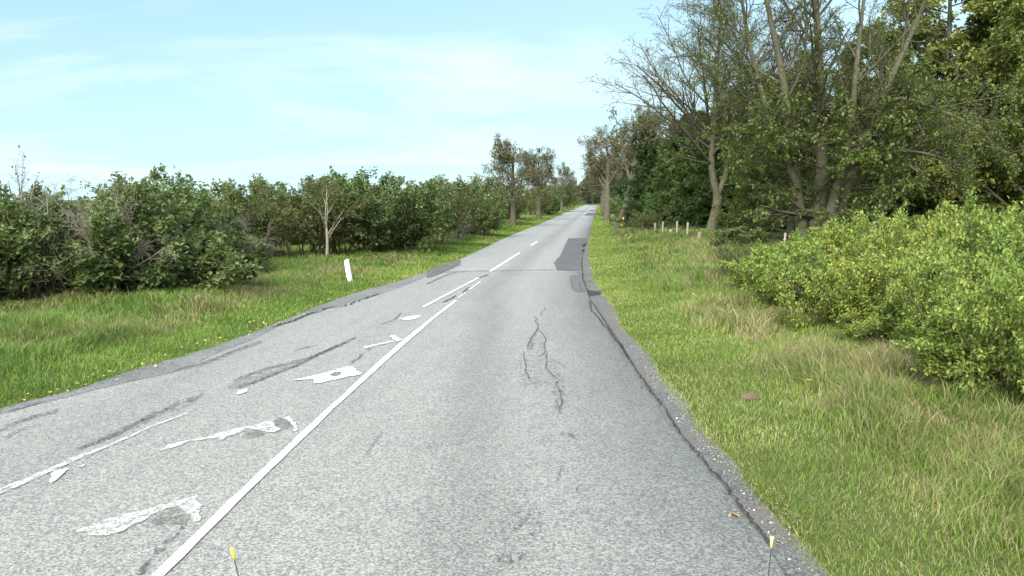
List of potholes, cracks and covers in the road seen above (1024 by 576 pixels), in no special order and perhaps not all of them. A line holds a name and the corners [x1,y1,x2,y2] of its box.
crack [523,307,565,411]
